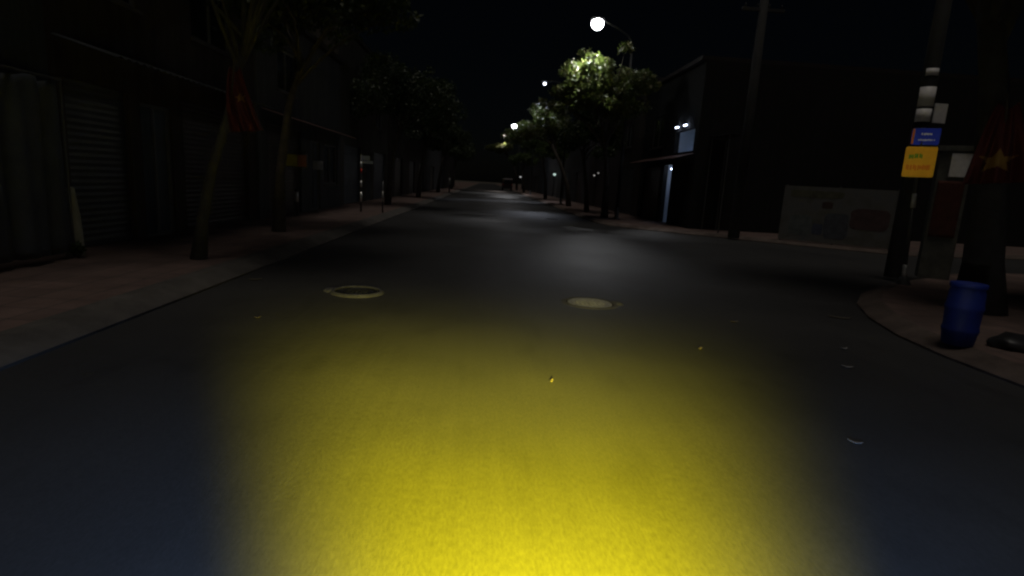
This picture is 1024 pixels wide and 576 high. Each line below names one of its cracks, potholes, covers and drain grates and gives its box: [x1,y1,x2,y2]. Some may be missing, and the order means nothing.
manhole cover [323,285,384,298]
manhole cover [561,297,623,309]
